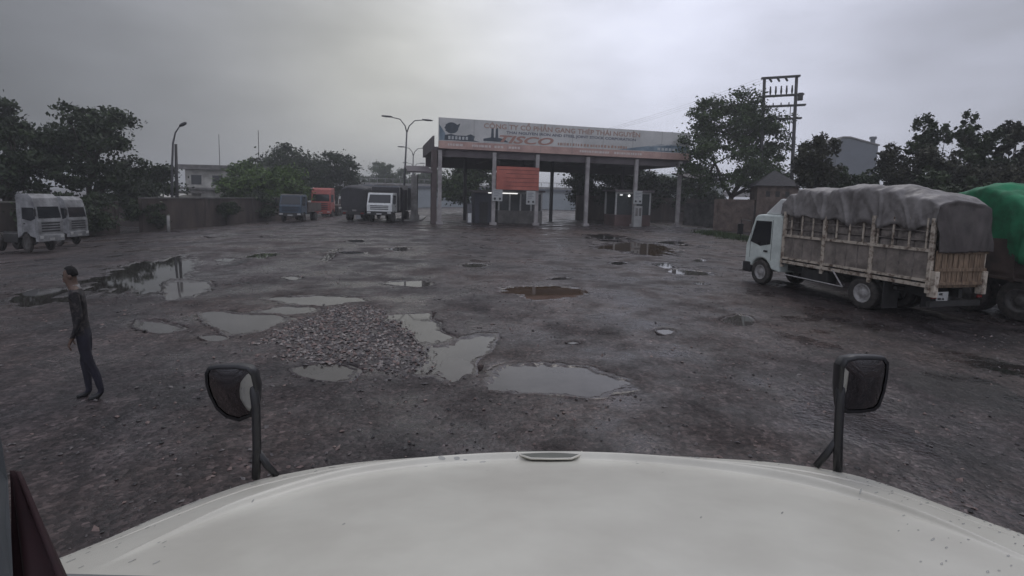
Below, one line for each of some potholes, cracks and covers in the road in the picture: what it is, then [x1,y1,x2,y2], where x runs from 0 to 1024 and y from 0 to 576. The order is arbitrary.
pothole [664,268,717,276]
pothole [158,279,216,302]
pothole [584,241,697,257]
pothole [130,319,187,334]
pothole [493,285,597,301]
pothole [652,262,679,270]
pothole [580,233,628,241]
pothole [408,331,502,386]
pothole [196,310,298,339]
pothole [198,334,230,342]
pothole [0,286,69,309]
pothole [478,361,641,400]
